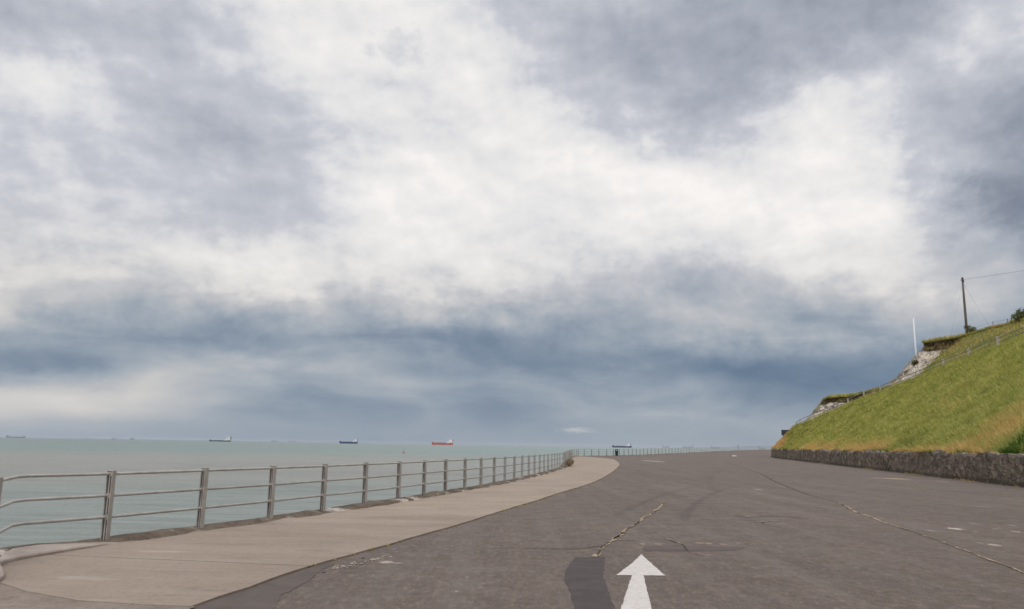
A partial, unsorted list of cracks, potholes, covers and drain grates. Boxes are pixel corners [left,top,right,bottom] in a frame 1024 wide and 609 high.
crack [532,502,702,557]
crack [729,463,1024,573]
